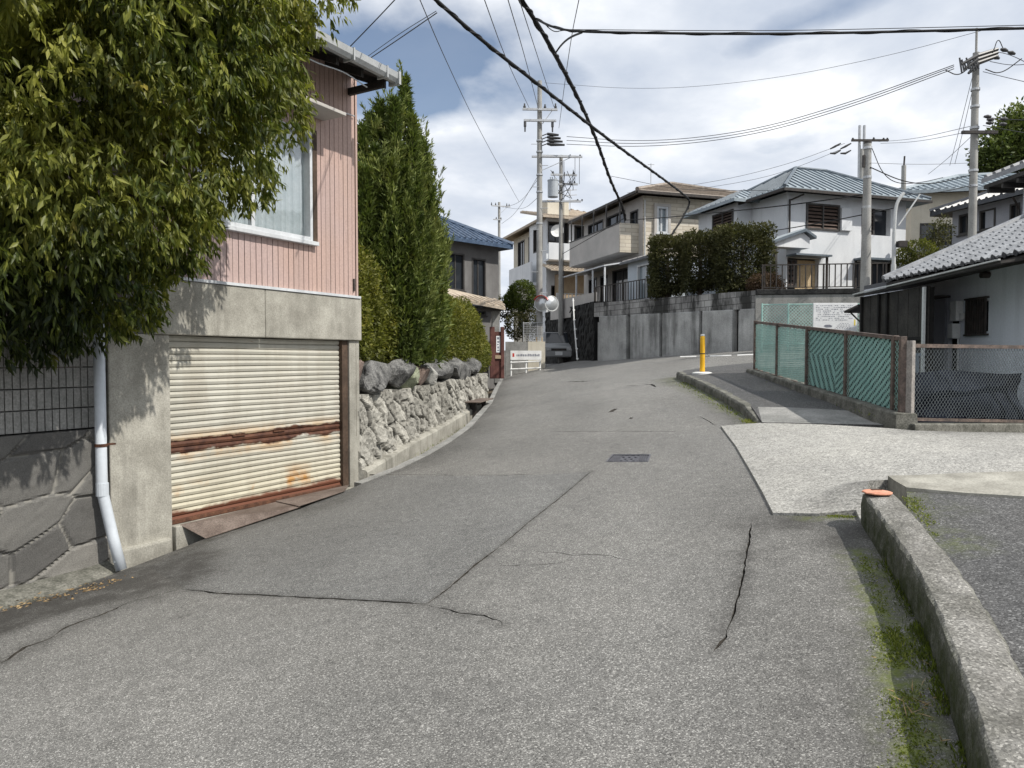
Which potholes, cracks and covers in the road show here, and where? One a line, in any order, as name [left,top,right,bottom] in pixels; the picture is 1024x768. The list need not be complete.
crack [714,526,752,650]
crack [487,551,631,567]
